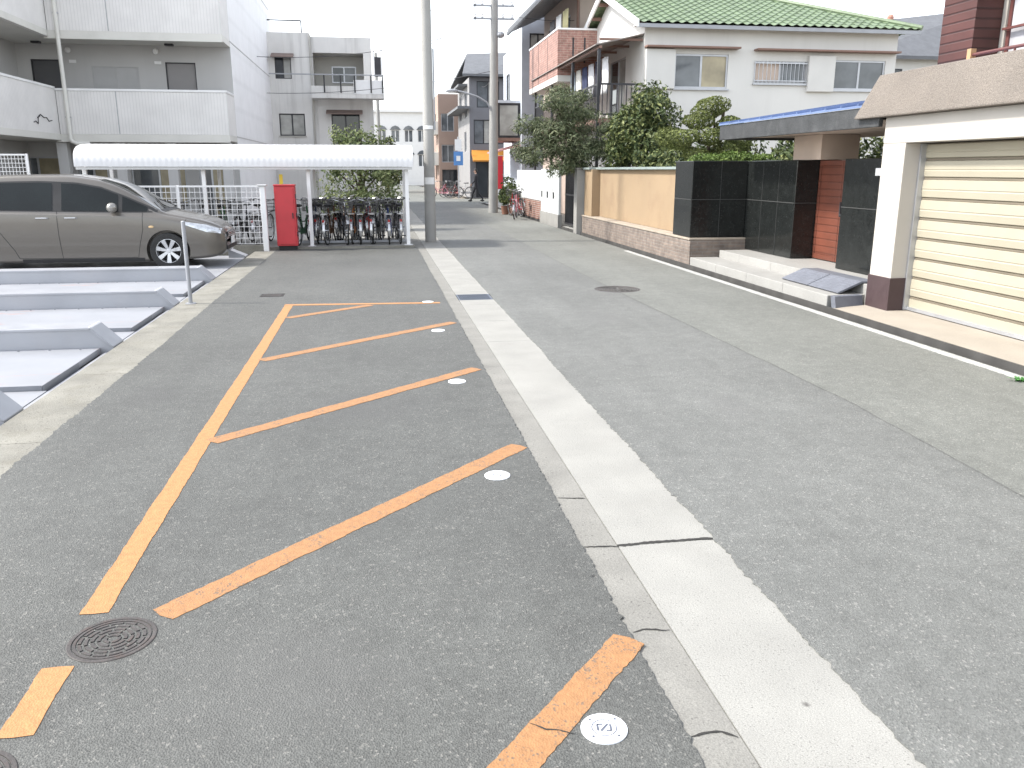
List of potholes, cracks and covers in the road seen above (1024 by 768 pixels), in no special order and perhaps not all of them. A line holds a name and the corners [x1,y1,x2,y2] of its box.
manhole cover [66,617,158,663]
crack [531,723,572,733]
